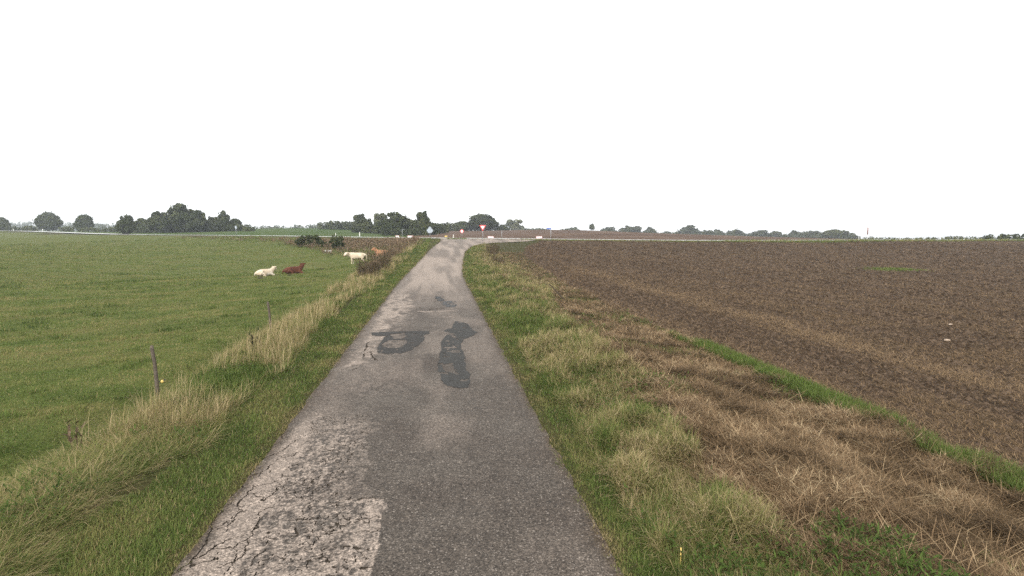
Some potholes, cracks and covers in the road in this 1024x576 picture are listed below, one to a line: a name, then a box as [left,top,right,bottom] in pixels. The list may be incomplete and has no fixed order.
crack [172,415,386,576]
